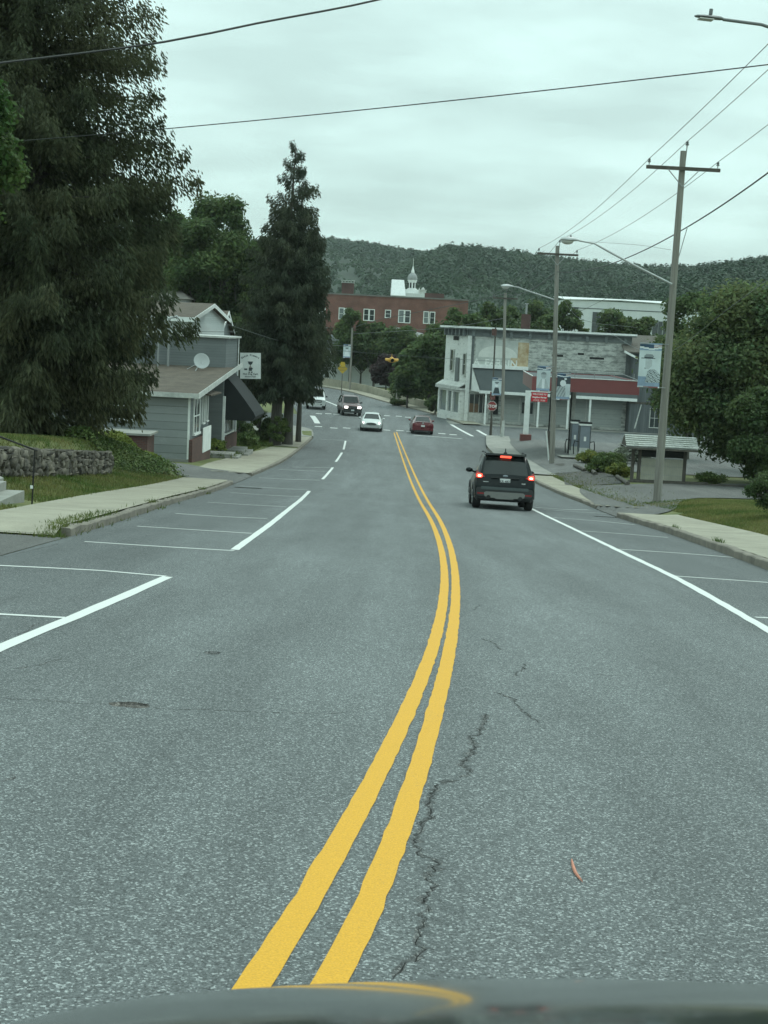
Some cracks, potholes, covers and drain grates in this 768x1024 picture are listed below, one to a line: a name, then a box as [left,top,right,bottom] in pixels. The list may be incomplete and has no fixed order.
crack [391,638,539,979]
